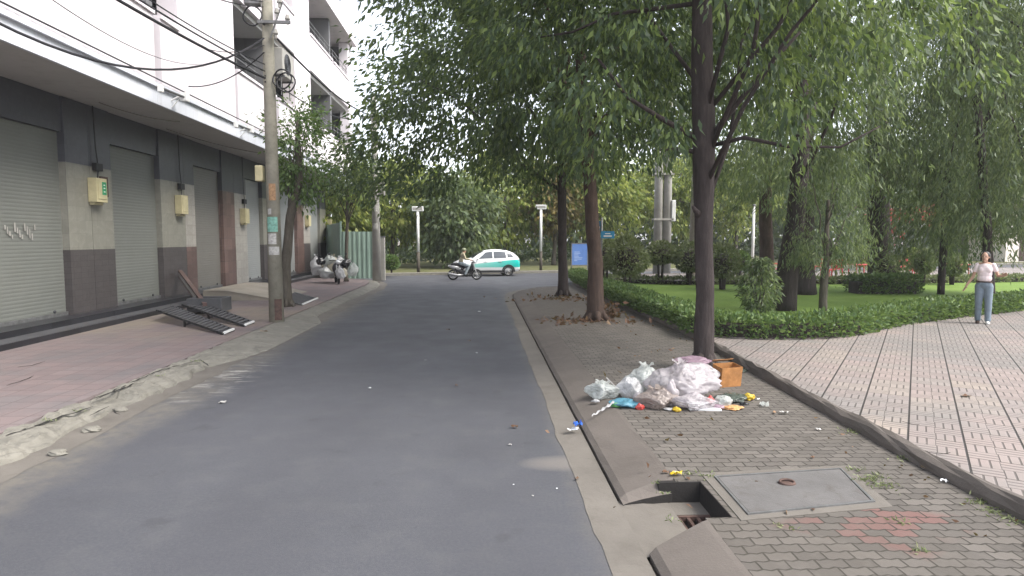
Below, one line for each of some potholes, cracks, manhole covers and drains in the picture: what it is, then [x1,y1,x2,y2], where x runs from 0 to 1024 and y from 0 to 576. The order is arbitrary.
drain grate [618,480,732,557]
manhole cover [701,465,893,521]
